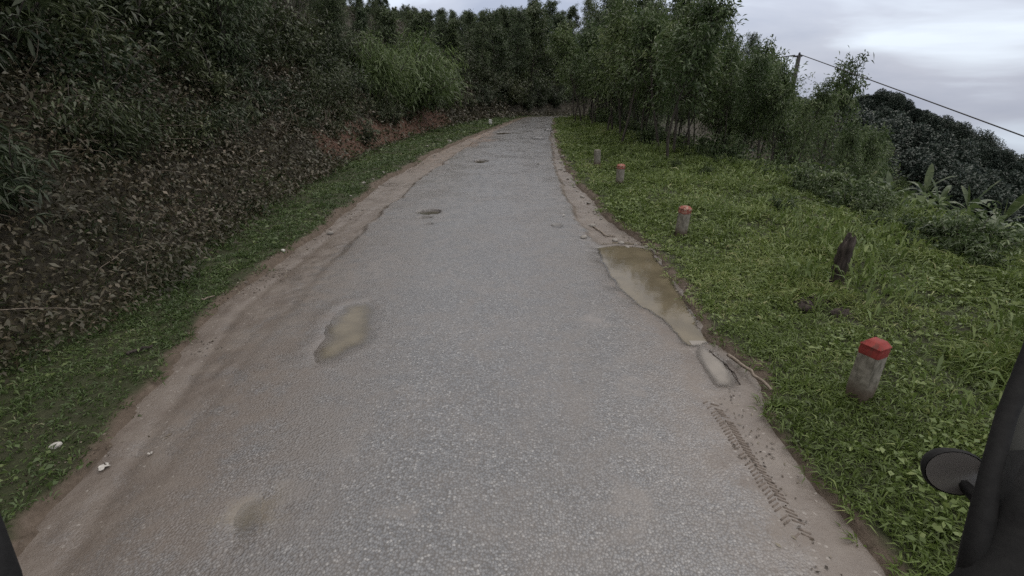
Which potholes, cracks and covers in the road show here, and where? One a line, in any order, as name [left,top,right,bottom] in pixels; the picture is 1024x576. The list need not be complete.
pothole [302,298,383,368]
